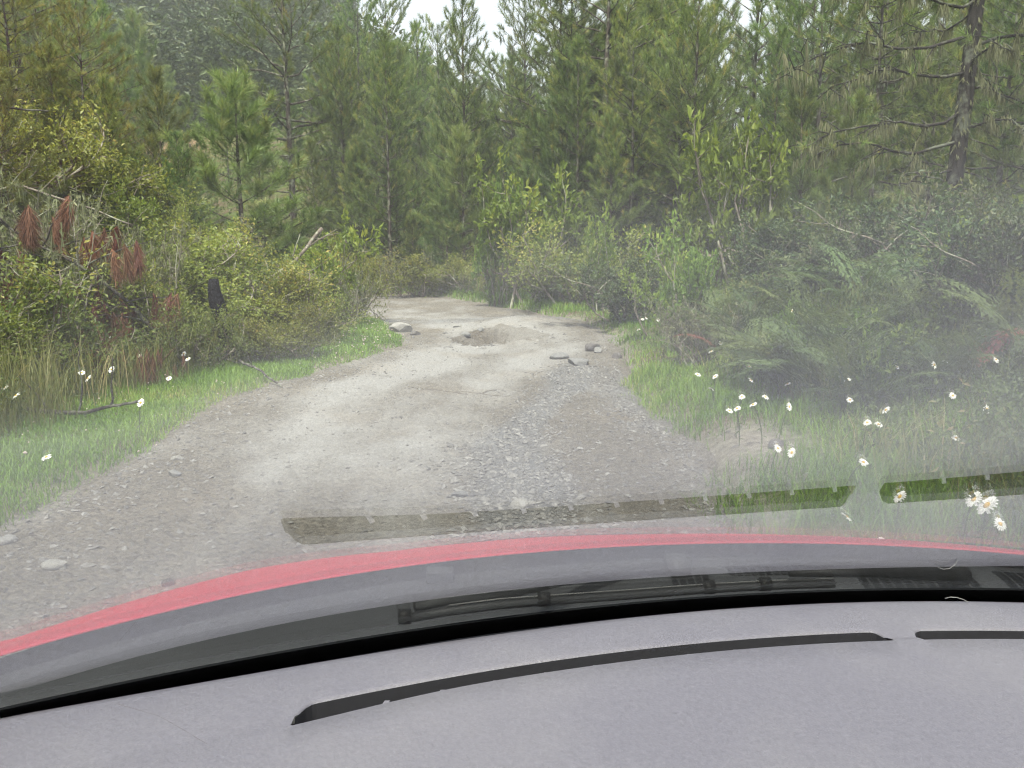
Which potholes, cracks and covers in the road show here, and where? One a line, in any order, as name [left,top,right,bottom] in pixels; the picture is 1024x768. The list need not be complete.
pothole [449,323,550,347]
